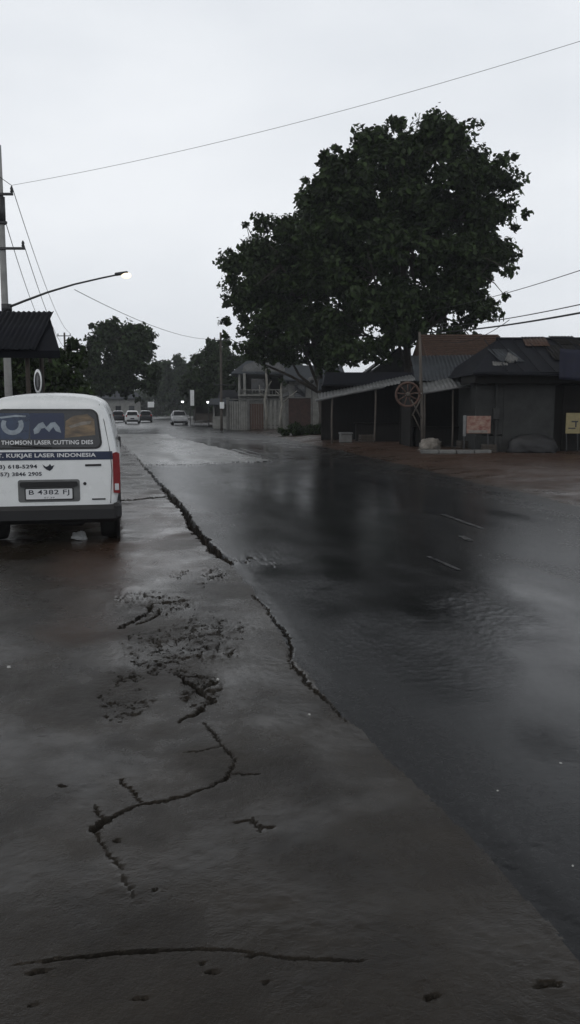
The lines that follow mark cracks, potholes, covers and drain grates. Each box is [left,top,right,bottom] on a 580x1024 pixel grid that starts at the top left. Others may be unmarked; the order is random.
crack [58,486,274,899]
crack [14,947,362,966]
crack [251,595,347,722]
